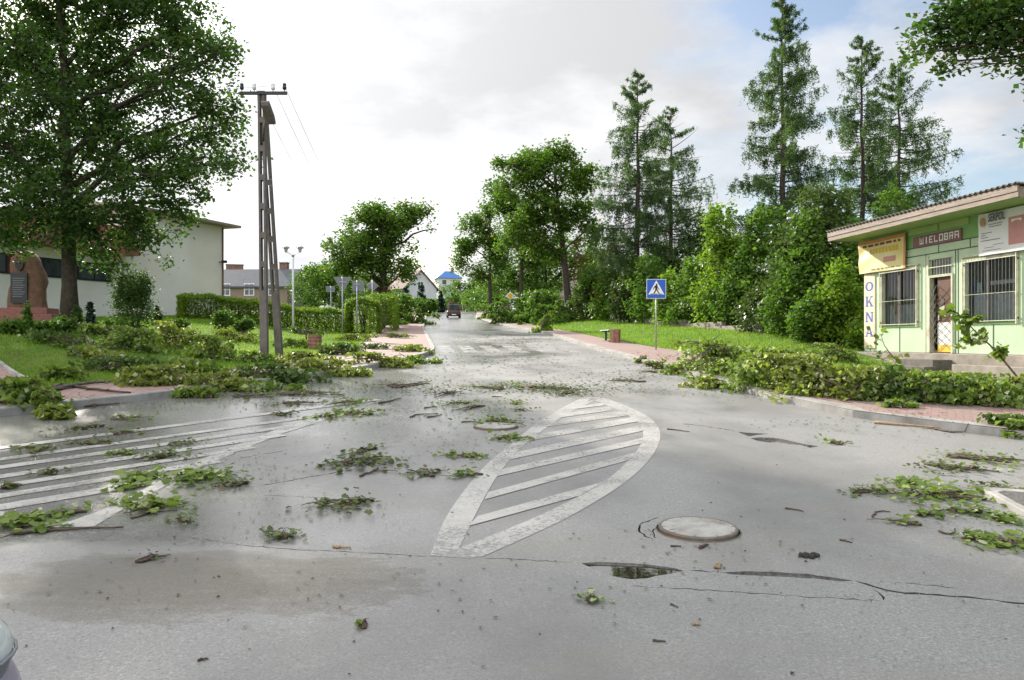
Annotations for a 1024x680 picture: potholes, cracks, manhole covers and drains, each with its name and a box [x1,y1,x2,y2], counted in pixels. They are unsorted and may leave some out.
crack [641,570,1024,604]
manhole cover [655,516,742,543]
pothole [582,562,683,579]
manhole cover [473,422,519,431]
crack [638,517,658,539]
